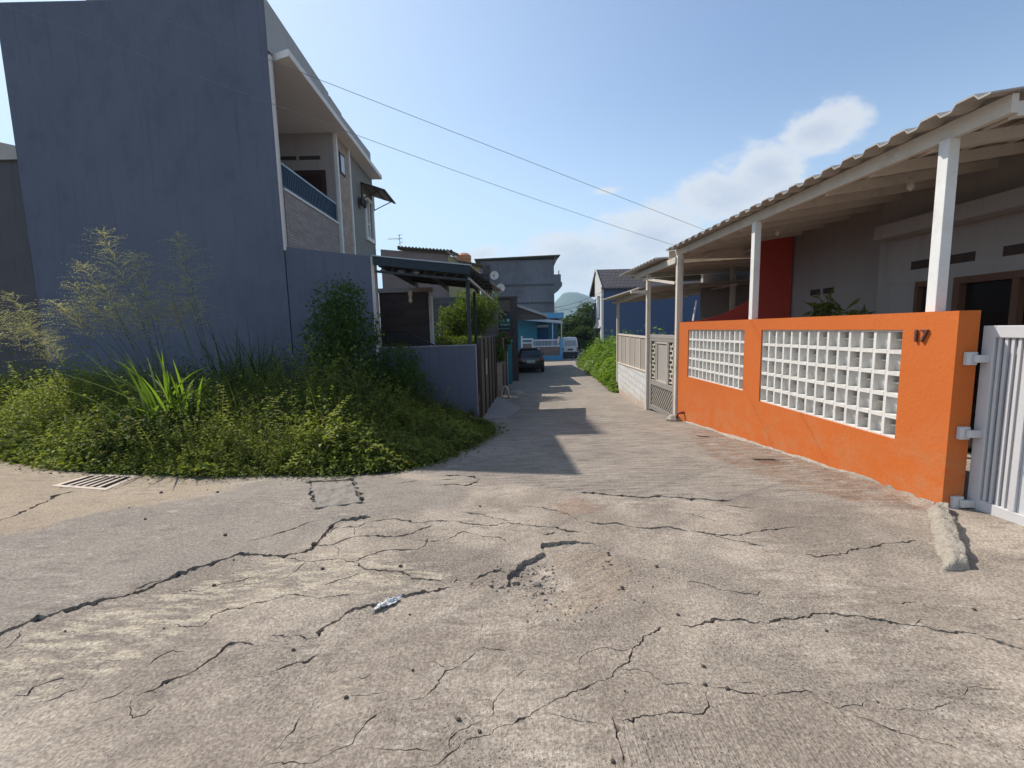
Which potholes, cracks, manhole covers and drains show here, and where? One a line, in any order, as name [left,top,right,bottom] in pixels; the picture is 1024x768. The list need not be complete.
drain grate [52,474,140,491]
pothole [506,540,635,617]
crack [0,506,1004,768]
